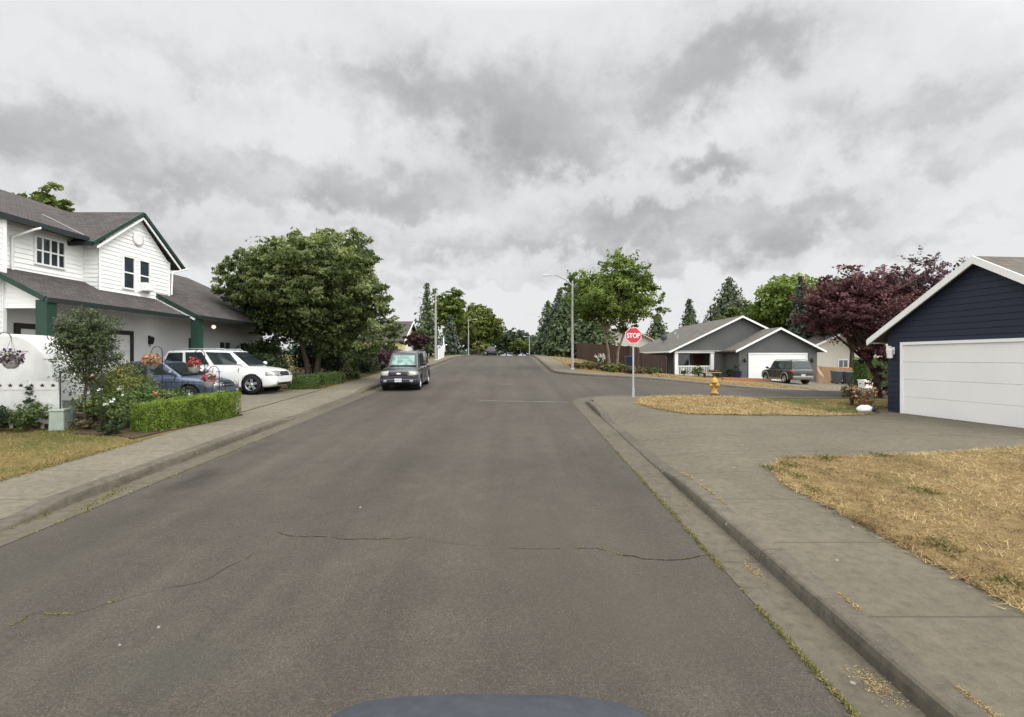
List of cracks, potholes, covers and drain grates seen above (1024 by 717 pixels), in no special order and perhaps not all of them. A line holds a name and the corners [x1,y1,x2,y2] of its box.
crack [279,532,705,560]
crack [10,553,253,626]
